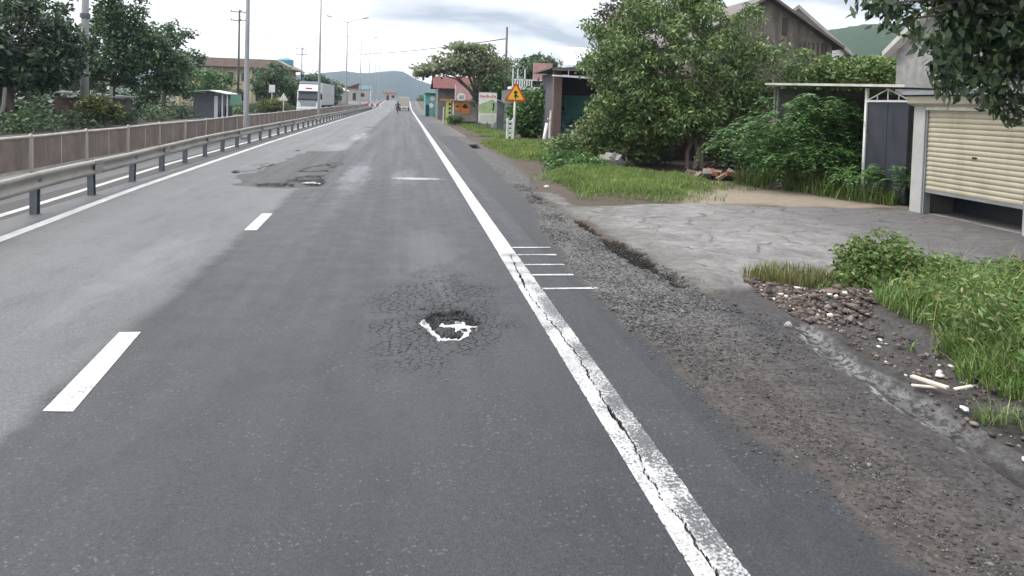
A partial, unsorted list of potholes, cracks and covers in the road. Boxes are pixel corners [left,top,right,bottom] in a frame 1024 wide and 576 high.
pothole [424,310,482,341]
pothole [282,175,328,188]
crack [325,255,719,576]
